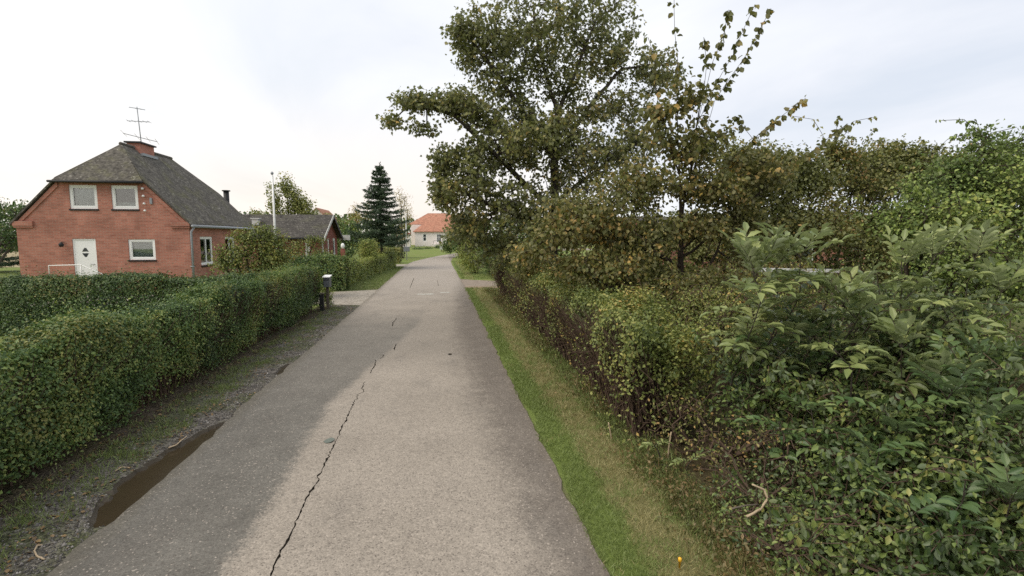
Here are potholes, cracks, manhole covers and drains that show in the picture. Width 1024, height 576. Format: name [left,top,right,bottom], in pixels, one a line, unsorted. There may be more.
crack [270,345,396,576]
